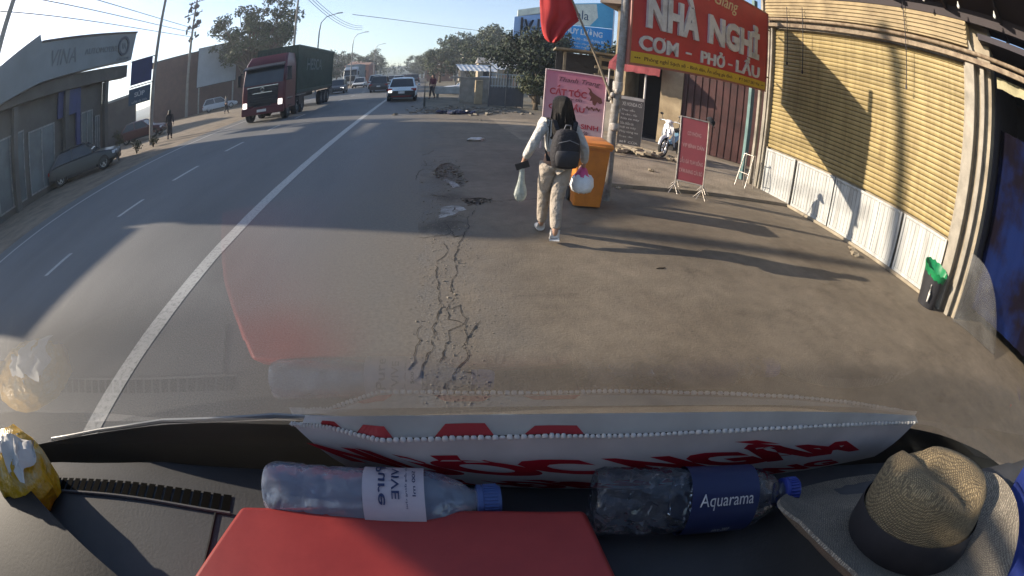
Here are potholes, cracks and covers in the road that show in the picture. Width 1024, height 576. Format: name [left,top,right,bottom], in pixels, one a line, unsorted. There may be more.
pothole [433,163,469,188]
pothole [461,198,493,206]
crack [408,206,479,391]
